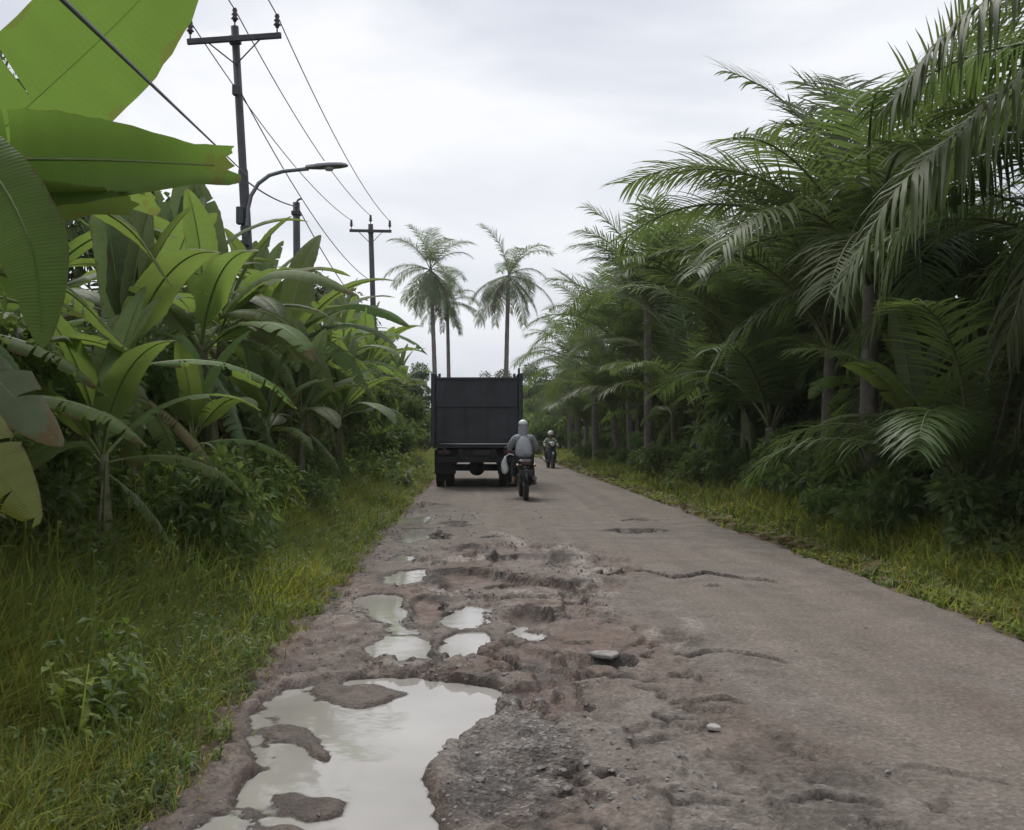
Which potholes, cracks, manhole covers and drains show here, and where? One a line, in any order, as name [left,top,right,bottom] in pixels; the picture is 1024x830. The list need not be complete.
pothole [398,528,434,544]
crack [482,627,795,675]
pothole [437,605,492,631]
pothole [500,603,574,628]
pothole [351,592,419,636]
pothole [404,594,455,626]
pothole [353,634,442,663]
pothole [507,626,546,641]
pothole [379,568,431,586]
crack [579,568,783,593]
pothole [211,665,514,830]
